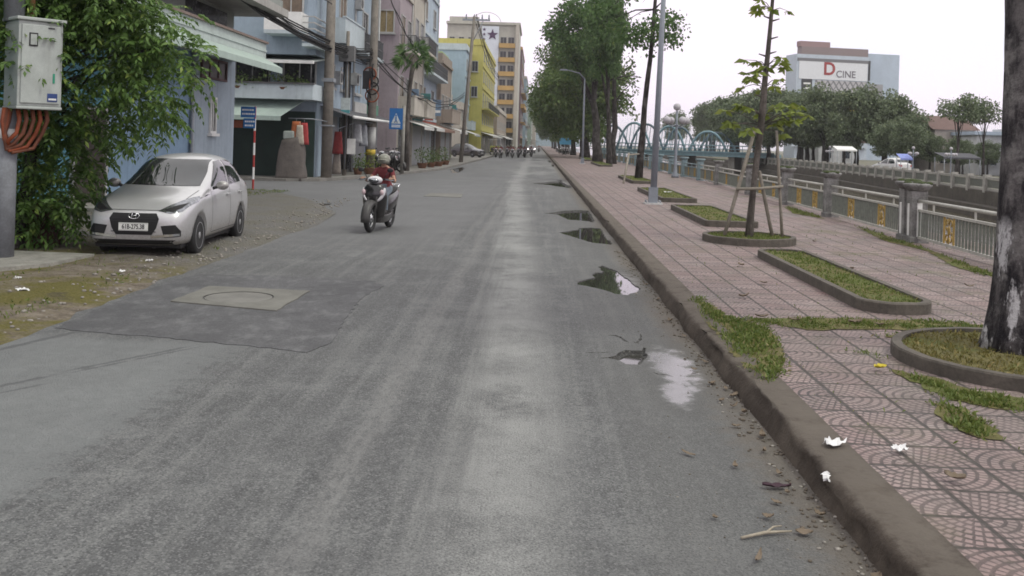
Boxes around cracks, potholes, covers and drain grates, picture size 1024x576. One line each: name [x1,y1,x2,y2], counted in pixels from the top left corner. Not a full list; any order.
manhole cover [171,286,310,311]
pothole [533,180,571,188]
pothole [546,210,595,223]
crack [580,334,642,354]
pothole [577,265,641,295]
pothole [605,347,648,365]
pothole [558,228,612,245]
